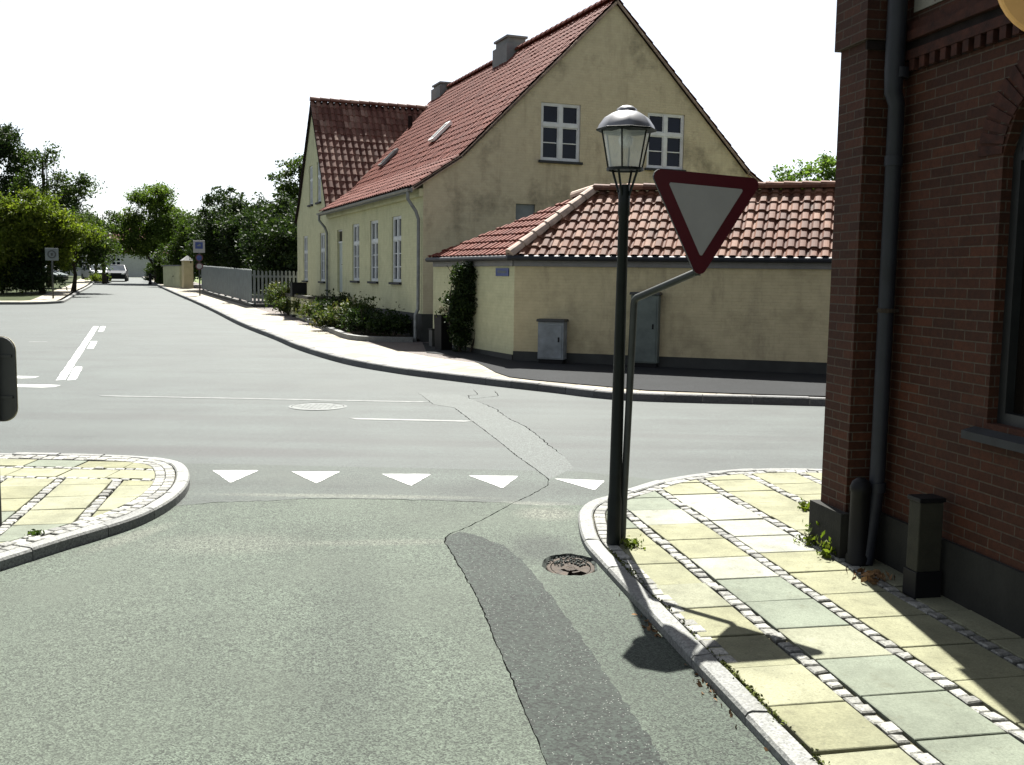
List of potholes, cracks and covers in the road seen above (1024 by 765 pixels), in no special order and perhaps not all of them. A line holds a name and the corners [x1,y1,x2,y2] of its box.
crack [182,392,557,765]
manhole cover [288,403,347,411]
